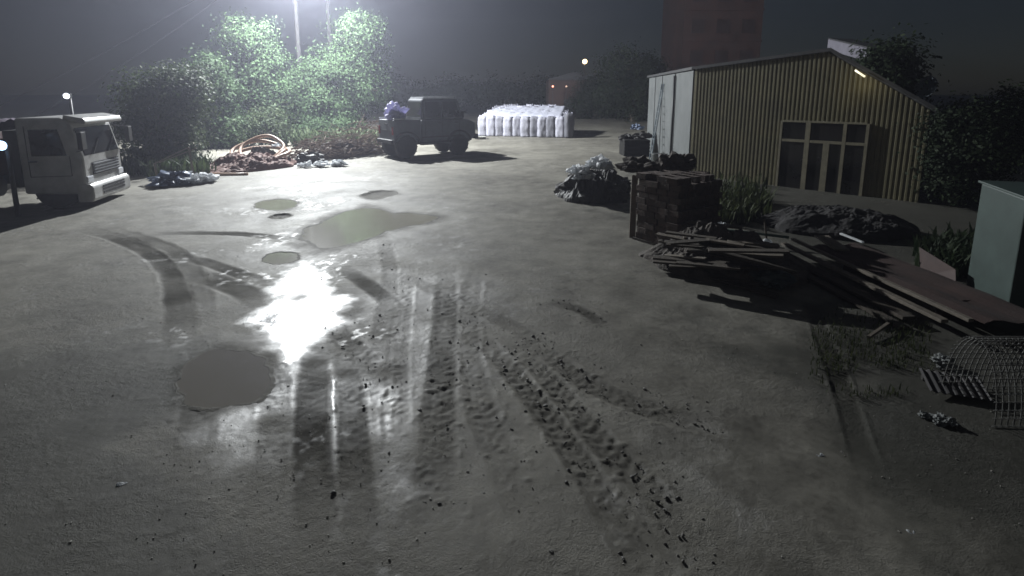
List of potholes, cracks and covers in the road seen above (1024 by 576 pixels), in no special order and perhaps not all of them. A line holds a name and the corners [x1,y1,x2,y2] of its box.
pothole [253,199,298,211]
pothole [262,252,299,265]
pothole [298,207,441,250]
pothole [359,190,398,200]
pothole [174,348,276,412]
